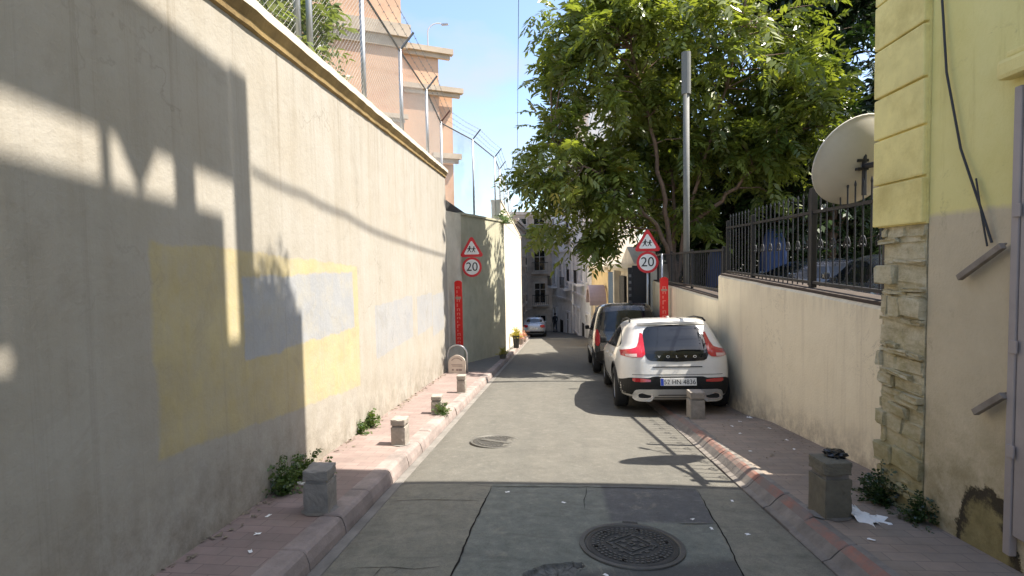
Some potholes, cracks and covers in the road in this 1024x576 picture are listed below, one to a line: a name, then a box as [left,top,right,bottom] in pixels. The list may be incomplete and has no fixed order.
pothole [520,561,588,576]
manhole cover [579,521,686,571]
crack [399,484,688,507]
manhole cover [470,435,518,449]
